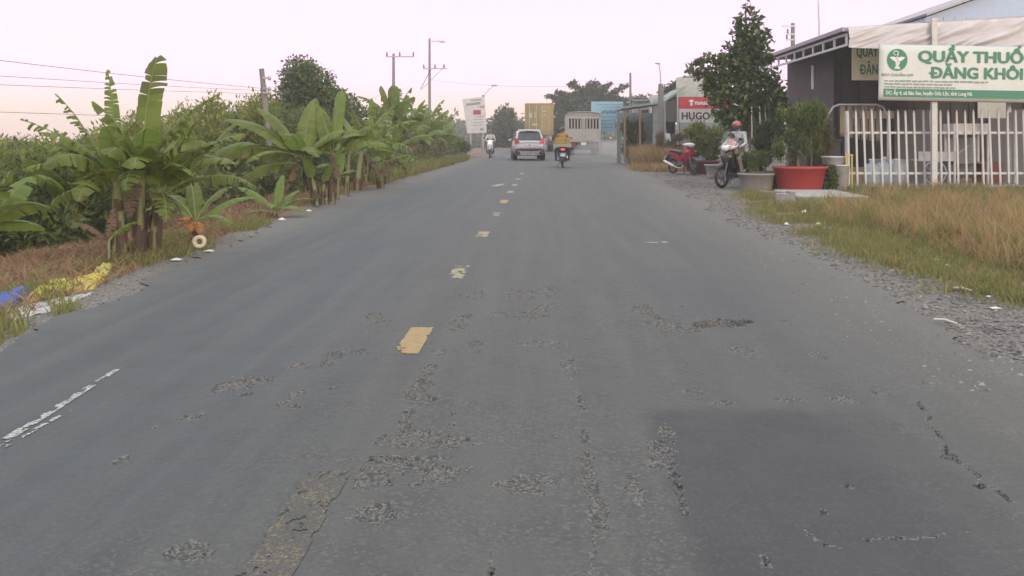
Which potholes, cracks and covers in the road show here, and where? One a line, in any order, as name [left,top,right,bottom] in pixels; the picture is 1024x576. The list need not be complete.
crack [863,531,974,542]
pothole [642,423,691,517]
pothole [574,389,611,538]
pothole [160,539,216,564]
pothole [211,375,276,397]
crack [914,400,1015,502]
crack [802,529,843,549]
pothole [344,429,484,527]
pothole [394,363,443,444]
pothole [499,283,566,324]
pothole [690,318,755,329]
